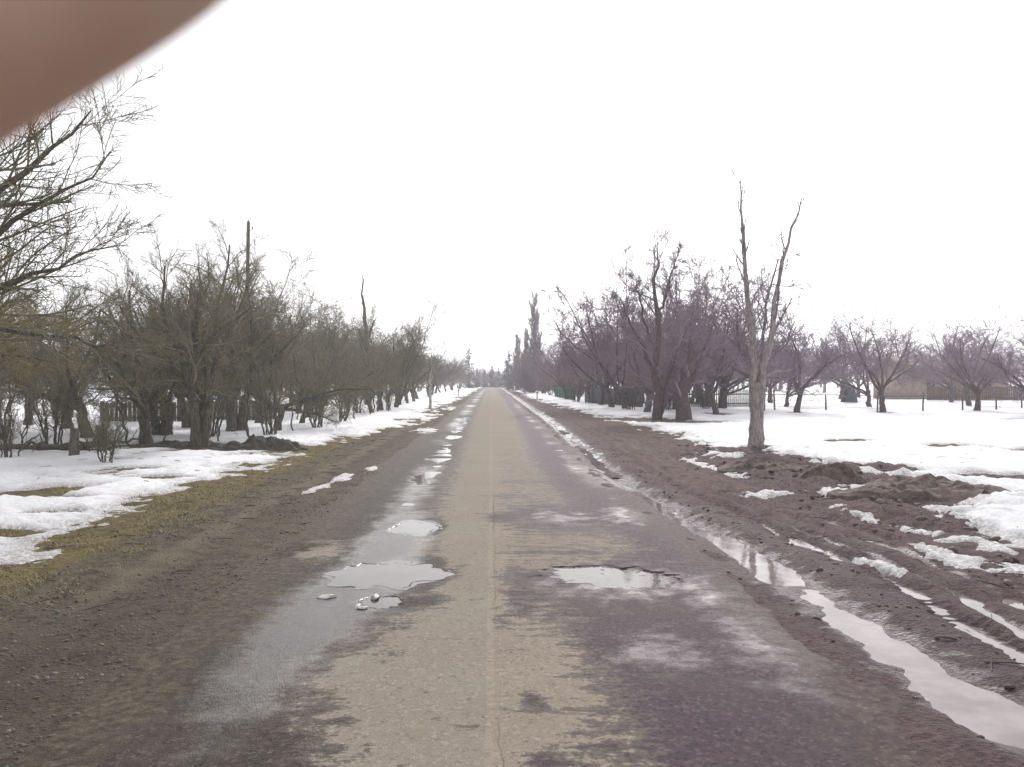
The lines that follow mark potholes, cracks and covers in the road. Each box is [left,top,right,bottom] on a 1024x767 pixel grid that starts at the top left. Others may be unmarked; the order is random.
pothole [319,562,460,590]
pothole [525,564,692,589]
pothole [358,595,405,610]
crack [493,498,504,760]
